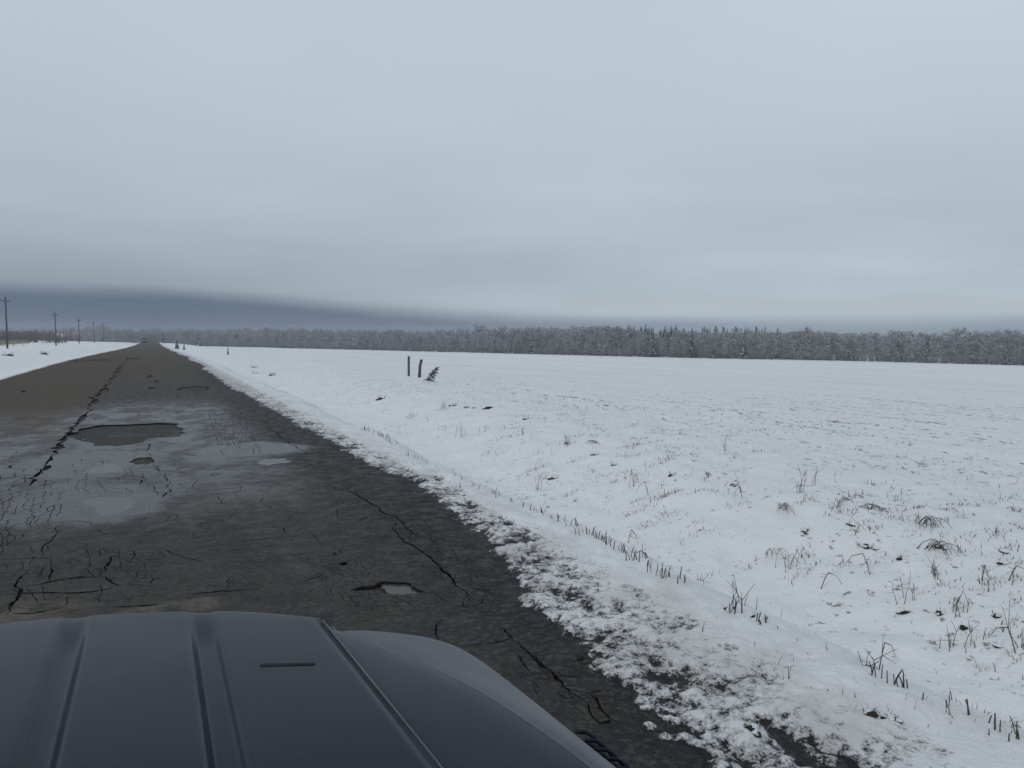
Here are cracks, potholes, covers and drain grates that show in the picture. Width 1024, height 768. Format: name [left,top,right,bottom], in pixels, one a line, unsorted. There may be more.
pothole [353,581,424,593]
pothole [66,423,185,446]
crack [475,625,623,725]
crack [0,410,503,640]
pothole [130,457,155,465]
